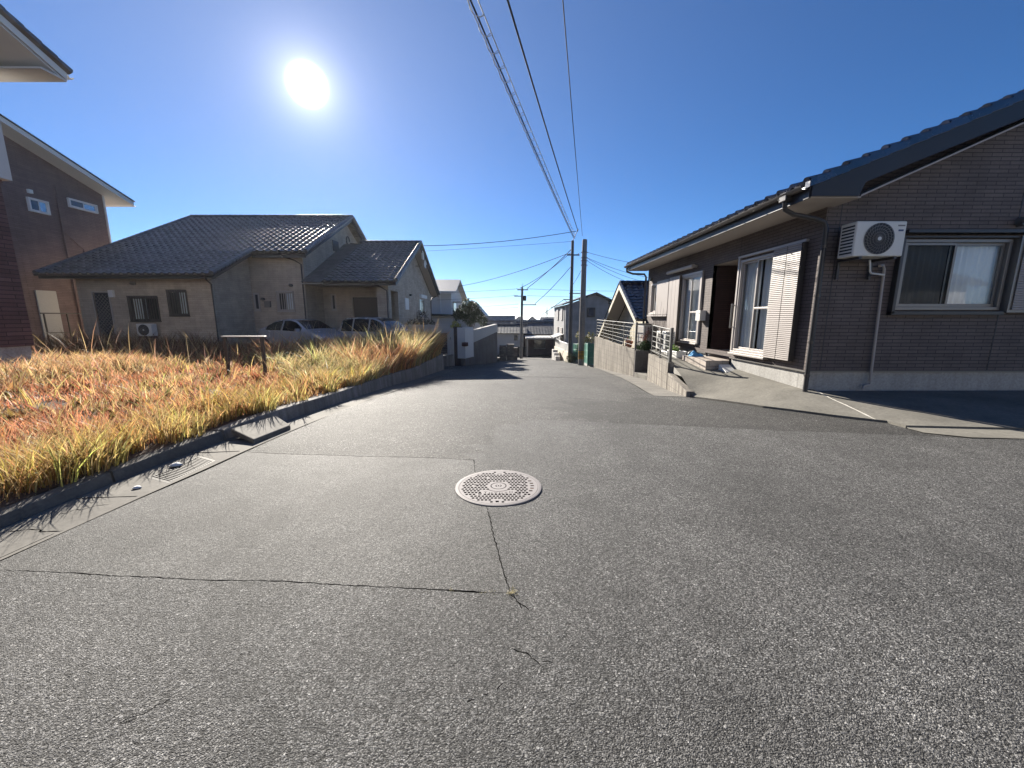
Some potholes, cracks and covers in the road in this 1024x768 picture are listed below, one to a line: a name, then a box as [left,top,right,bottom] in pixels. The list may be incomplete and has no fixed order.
crack [7,508,529,610]
manhole cover [455,470,542,507]
drain grate [148,456,216,494]
